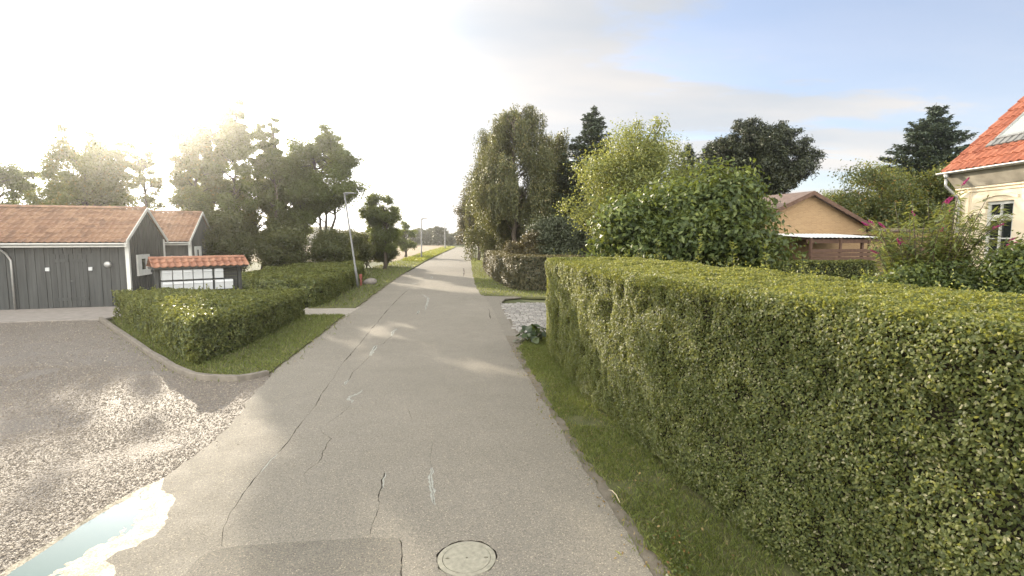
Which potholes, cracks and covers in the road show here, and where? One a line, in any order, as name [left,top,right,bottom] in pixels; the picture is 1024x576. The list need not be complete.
pothole [0,478,176,576]
manhole cover [436,540,498,576]
crack [222,276,433,539]
